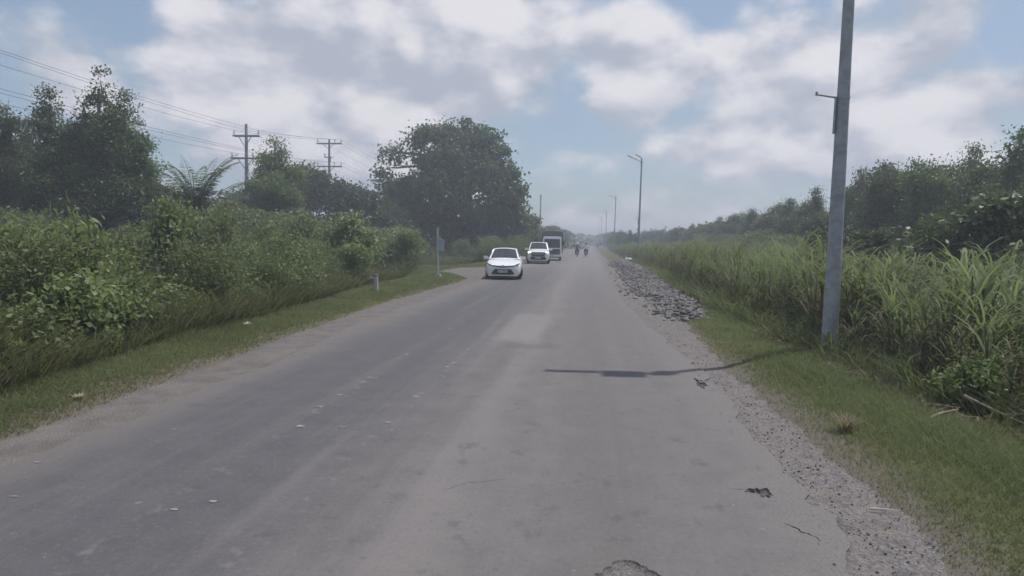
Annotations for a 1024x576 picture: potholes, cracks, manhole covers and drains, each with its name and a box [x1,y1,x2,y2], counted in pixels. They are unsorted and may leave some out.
pothole [593,560,661,576]
pothole [745,488,773,498]
